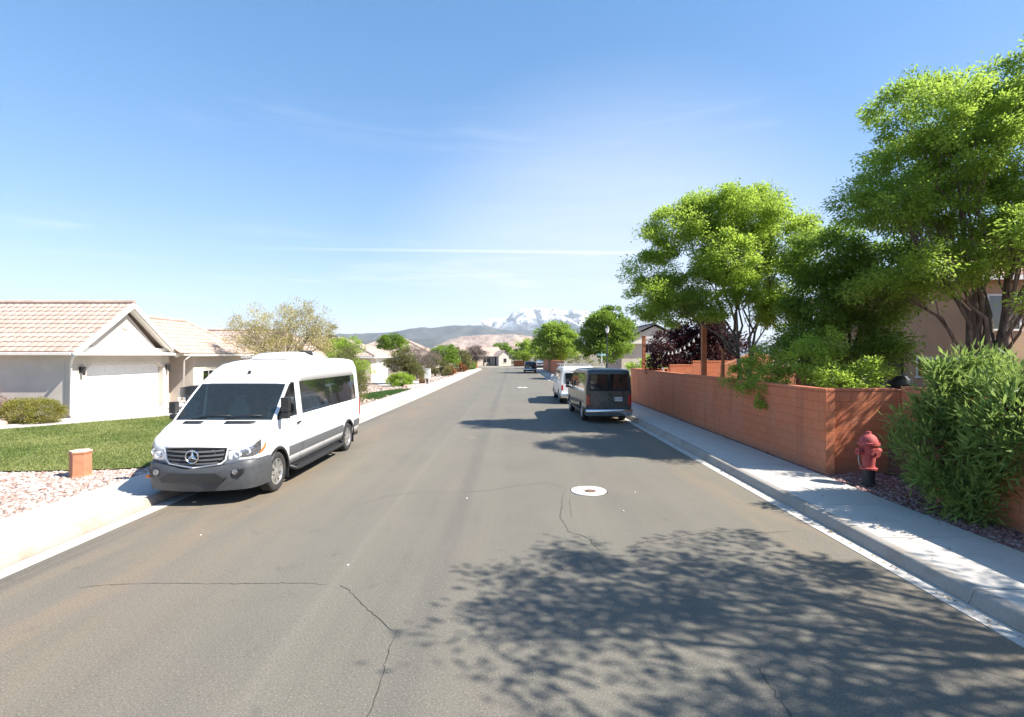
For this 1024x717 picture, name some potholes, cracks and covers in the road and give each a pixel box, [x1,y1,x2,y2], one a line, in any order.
manhole cover [570,486,608,496]
crack [365,483,625,578]
crack [78,582,395,717]
